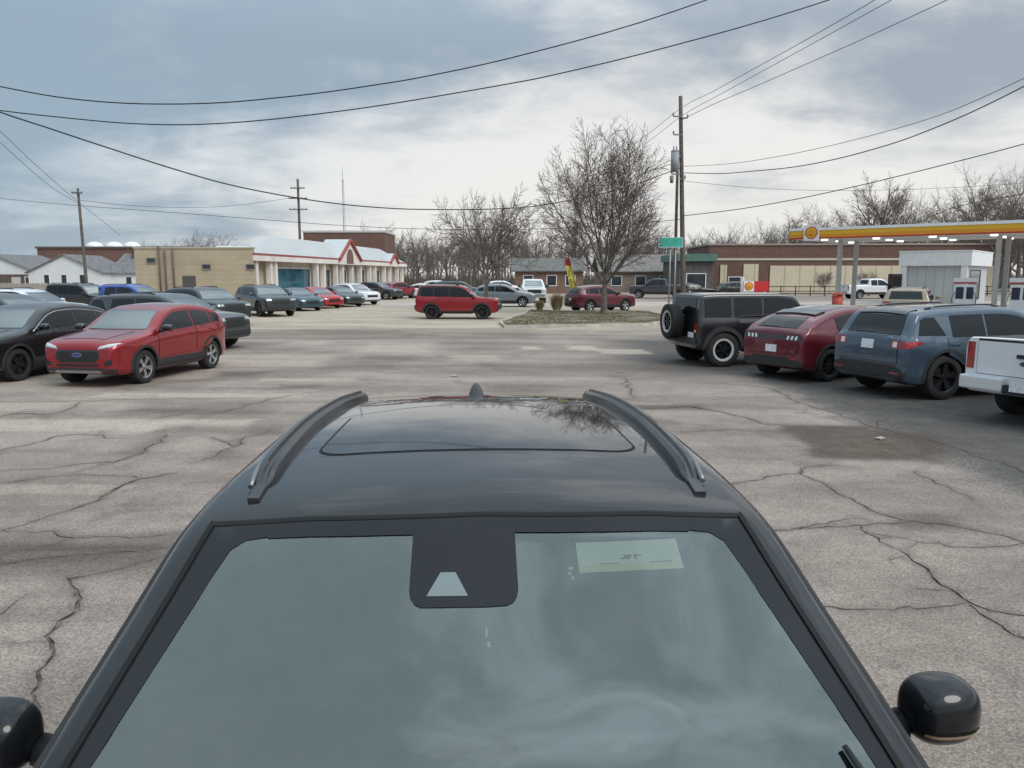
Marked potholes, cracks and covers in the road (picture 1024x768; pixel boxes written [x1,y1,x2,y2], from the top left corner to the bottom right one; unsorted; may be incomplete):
crack [621,378,765,432]
crack [731,465,1024,639]
crack [0,435,175,709]
